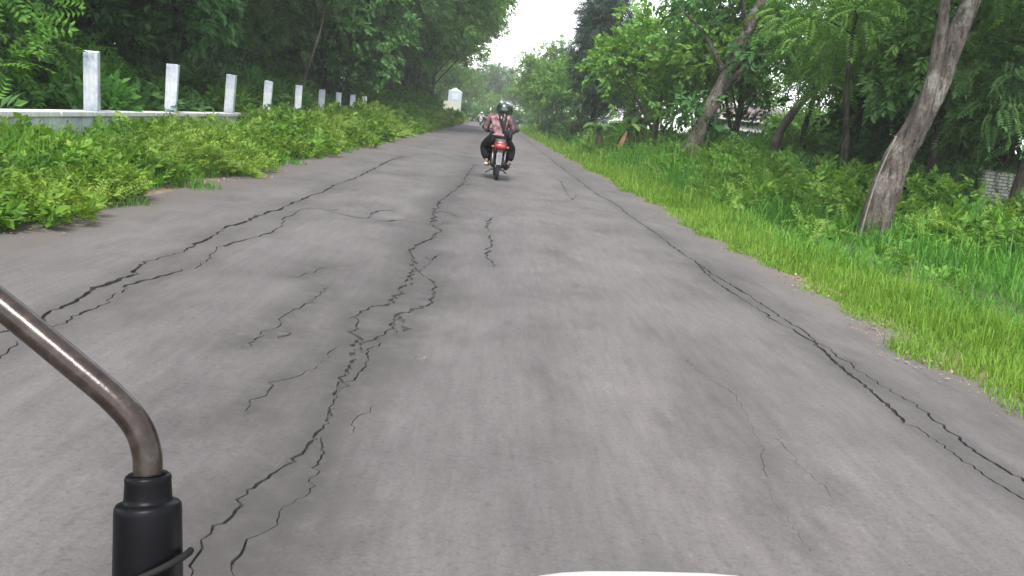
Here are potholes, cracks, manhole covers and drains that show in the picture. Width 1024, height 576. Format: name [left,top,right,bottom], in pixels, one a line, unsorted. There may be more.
crack [0,156,481,576]
crack [484,217,495,267]
crack [521,136,1024,548]
